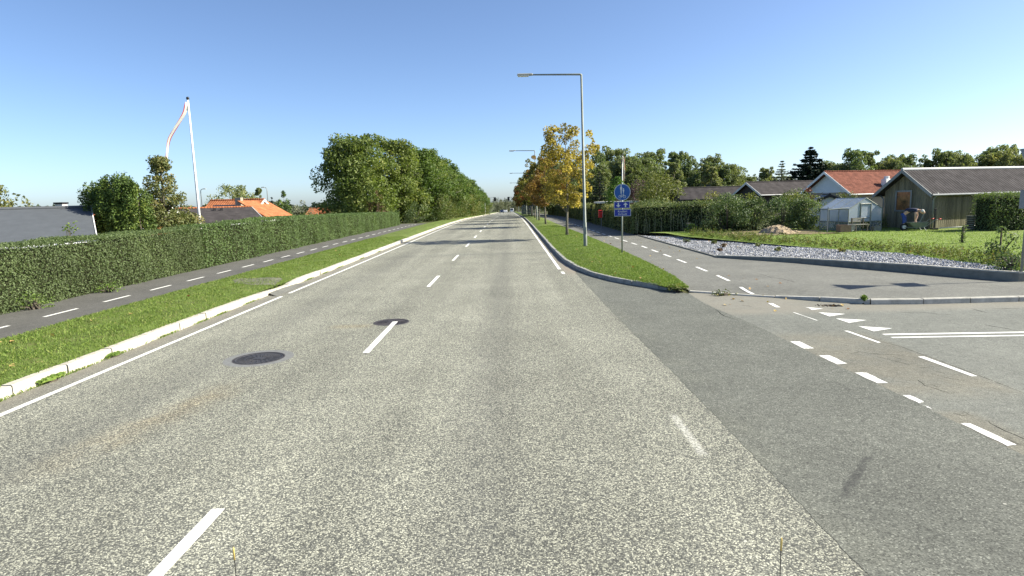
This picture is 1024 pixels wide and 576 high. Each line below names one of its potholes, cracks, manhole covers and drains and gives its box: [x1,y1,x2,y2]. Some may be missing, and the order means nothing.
manhole cover [222,350,294,367]
